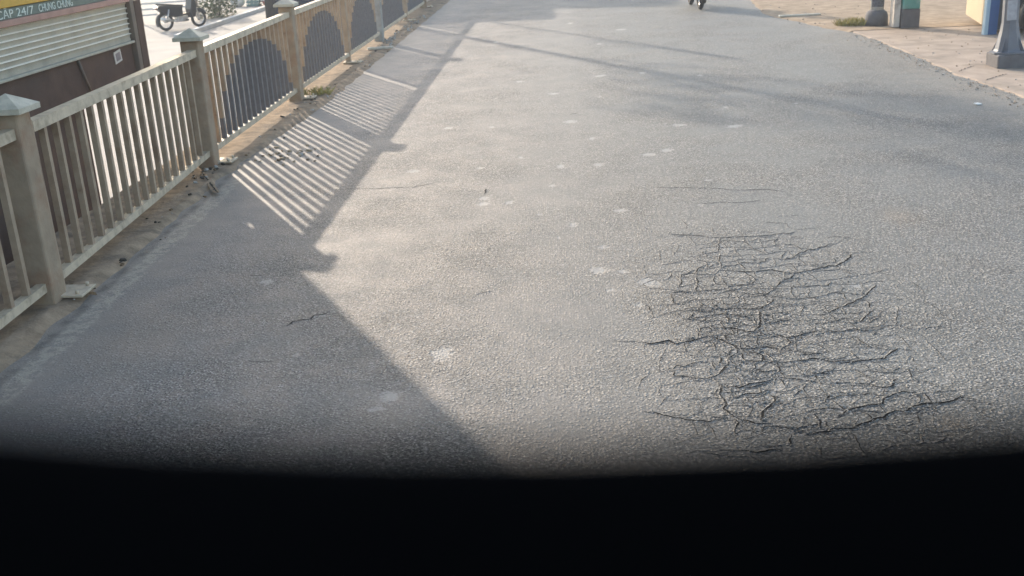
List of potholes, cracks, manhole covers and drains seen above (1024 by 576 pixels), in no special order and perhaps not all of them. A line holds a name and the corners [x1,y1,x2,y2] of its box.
crack [282,311,331,327]
crack [619,187,991,435]
